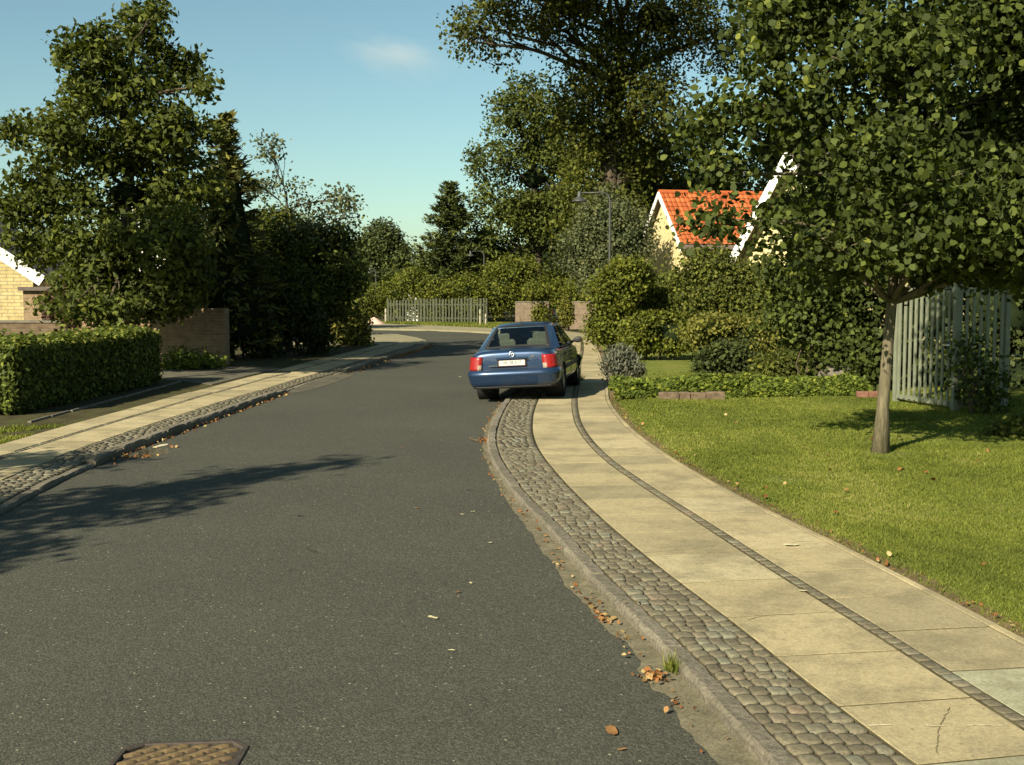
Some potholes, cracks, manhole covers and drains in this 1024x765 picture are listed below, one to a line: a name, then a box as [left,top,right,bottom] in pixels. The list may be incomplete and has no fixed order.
crack [923,706,950,754]
manhole cover [109,739,250,765]
